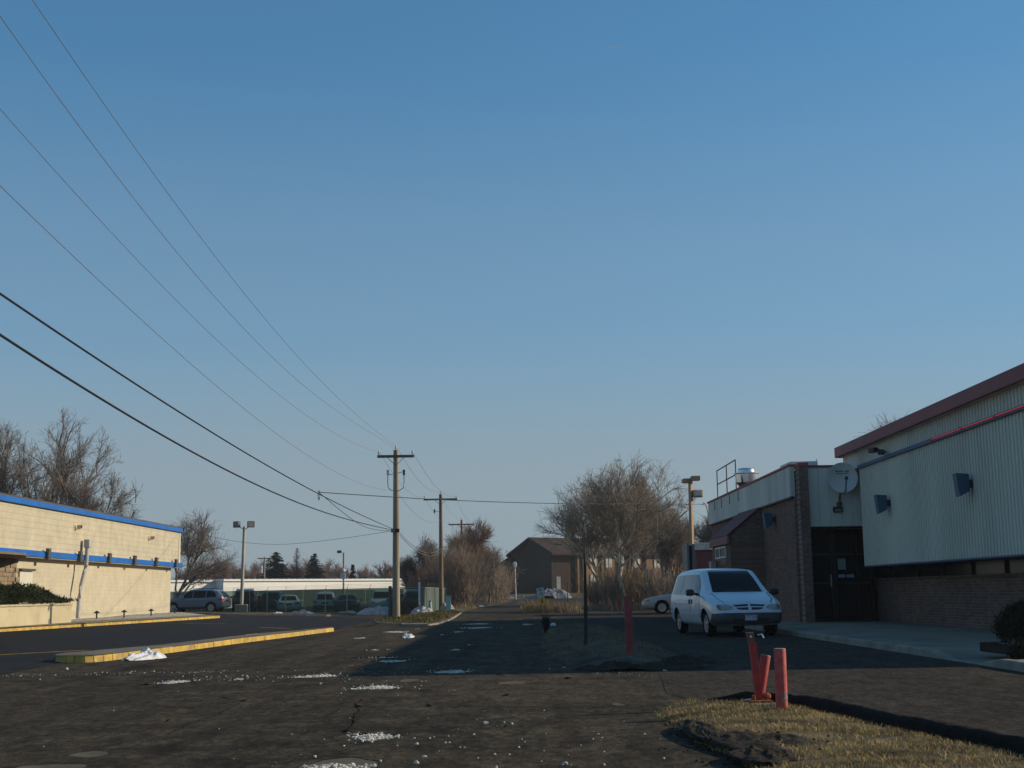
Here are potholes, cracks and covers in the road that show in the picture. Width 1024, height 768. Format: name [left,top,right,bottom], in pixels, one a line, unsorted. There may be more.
crack [345,698,362,734]
